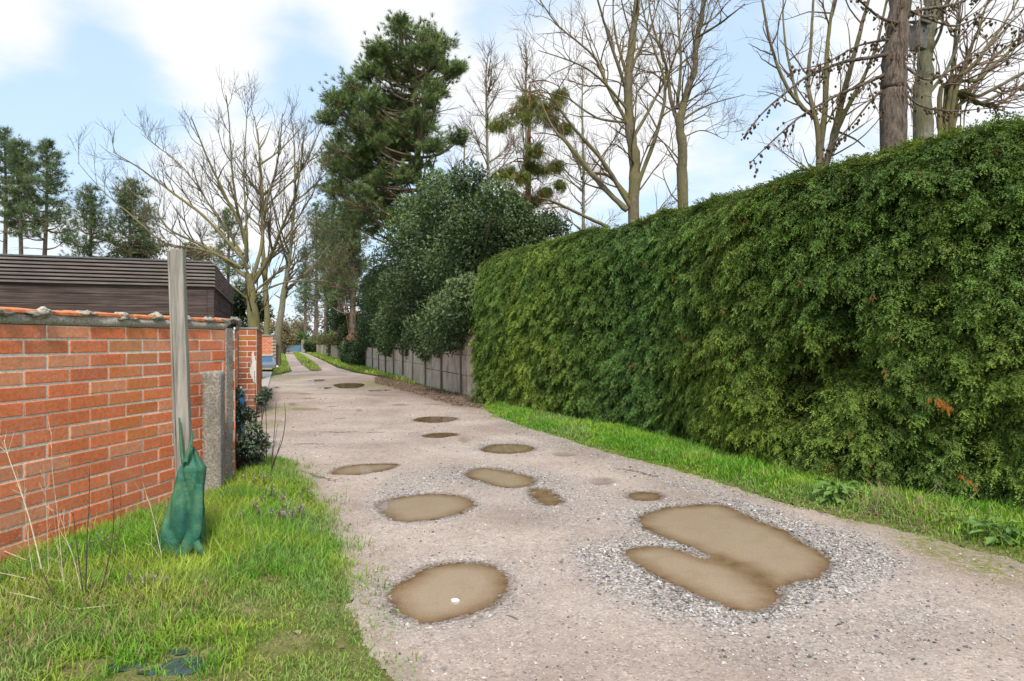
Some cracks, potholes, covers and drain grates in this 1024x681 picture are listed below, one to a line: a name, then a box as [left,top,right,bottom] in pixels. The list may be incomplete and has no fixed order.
pothole [376,558,522,628]
pothole [369,491,483,524]
pothole [324,462,405,476]
pothole [618,489,671,502]
pothole [476,443,541,454]
pothole [458,466,542,489]
pothole [619,503,836,614]
pothole [522,486,571,507]
